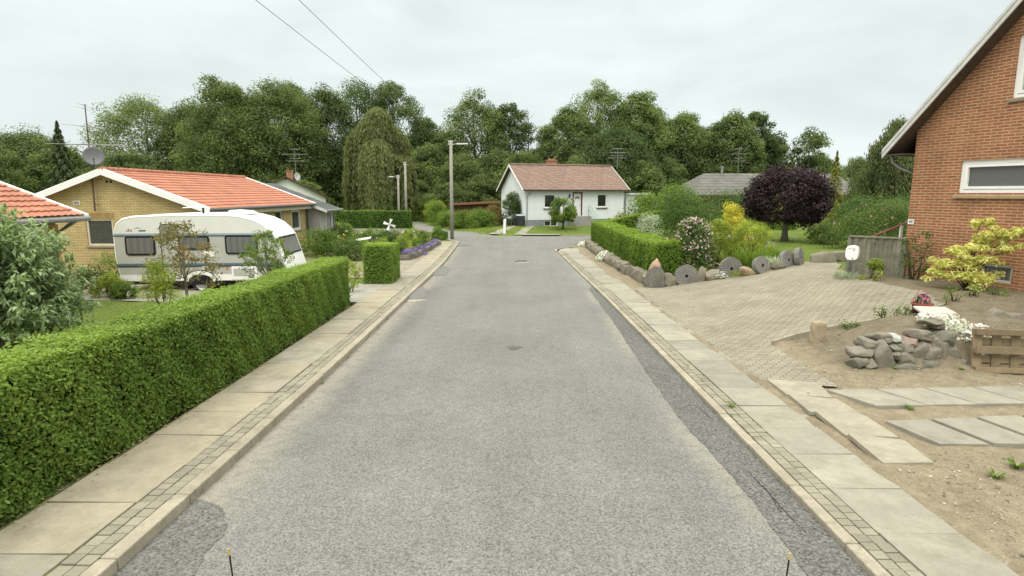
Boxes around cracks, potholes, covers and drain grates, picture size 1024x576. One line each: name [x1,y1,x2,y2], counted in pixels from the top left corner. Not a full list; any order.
crack [746,469,806,532]
